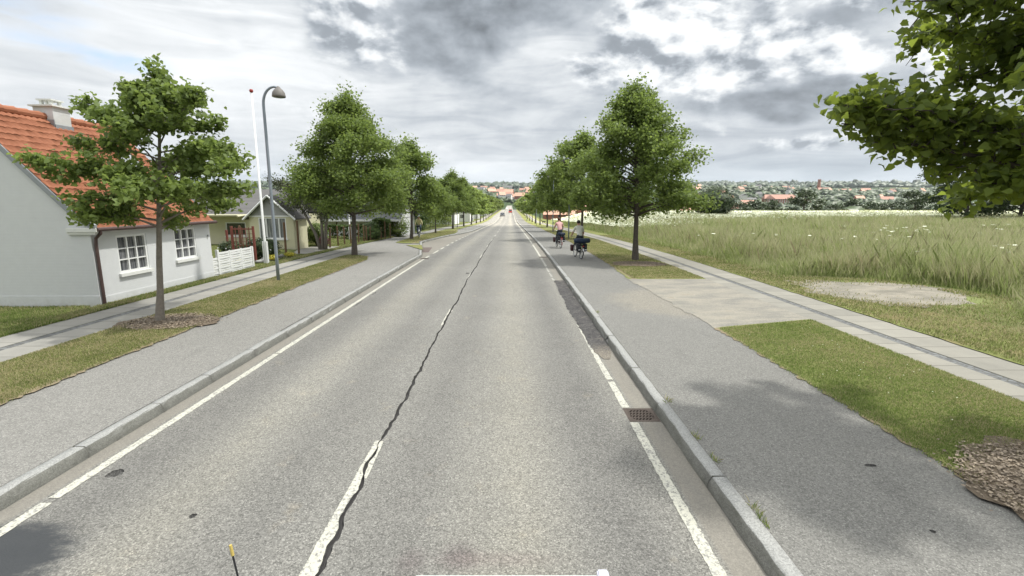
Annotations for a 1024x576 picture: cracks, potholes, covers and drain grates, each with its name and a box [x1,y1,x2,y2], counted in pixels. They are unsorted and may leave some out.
drain grate [623,408,661,422]
crack [315,238,494,576]
